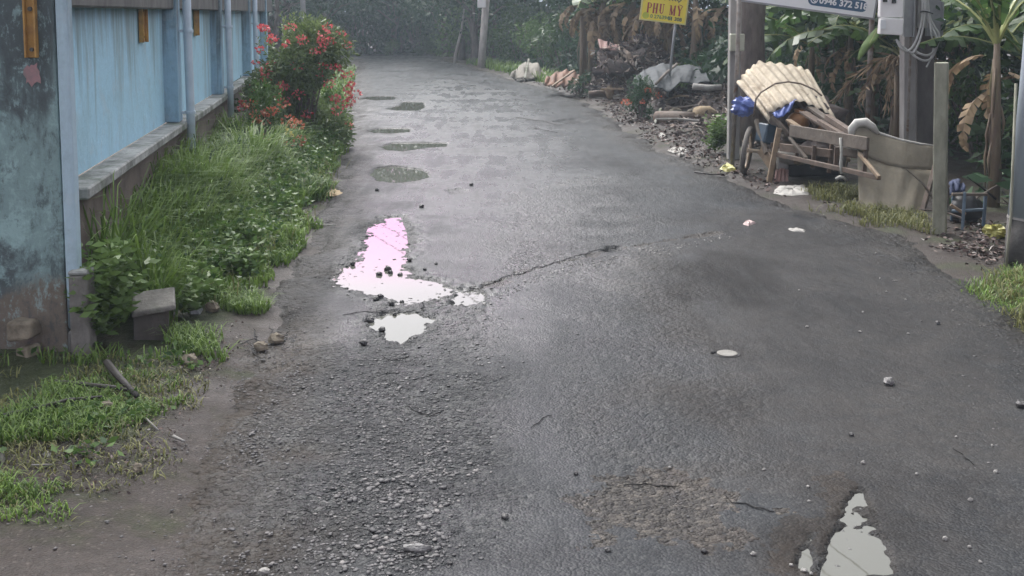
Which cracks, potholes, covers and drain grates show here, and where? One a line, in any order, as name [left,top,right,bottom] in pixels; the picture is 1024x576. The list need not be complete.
crack [474,231,723,291]
crack [726,496,774,512]
pothole [816,487,900,576]
pothole [450,286,491,308]
pothole [792,532,821,573]
pothole [323,214,463,307]
pothole [365,309,440,344]
